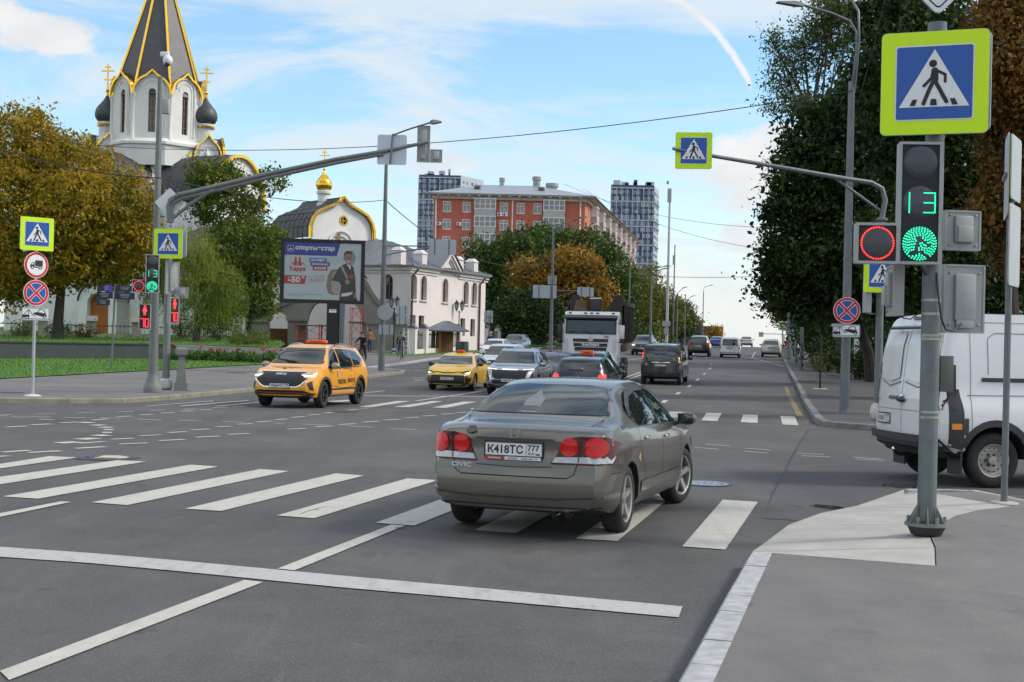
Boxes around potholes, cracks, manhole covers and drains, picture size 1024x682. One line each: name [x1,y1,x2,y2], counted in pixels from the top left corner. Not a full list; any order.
crack [769,429,809,508]
